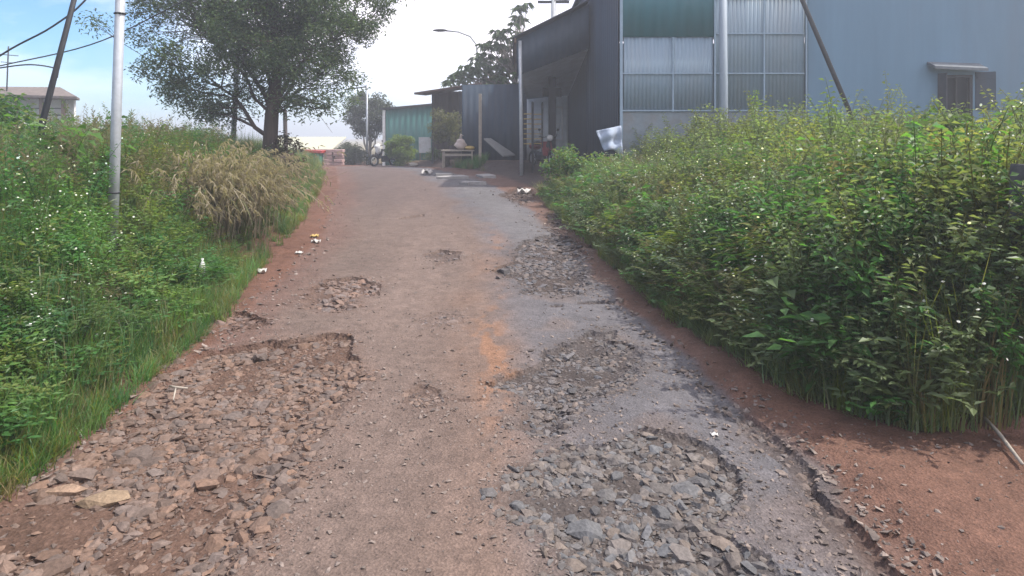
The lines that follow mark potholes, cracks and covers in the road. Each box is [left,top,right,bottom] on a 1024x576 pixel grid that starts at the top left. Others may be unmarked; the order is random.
pothole [290,275,387,314]
pothole [475,325,663,443]
pothole [489,234,606,299]
pothole [394,381,450,416]
pothole [479,425,796,576]
pothole [419,249,462,266]
pothole [208,307,280,334]
pothole [0,330,380,576]
